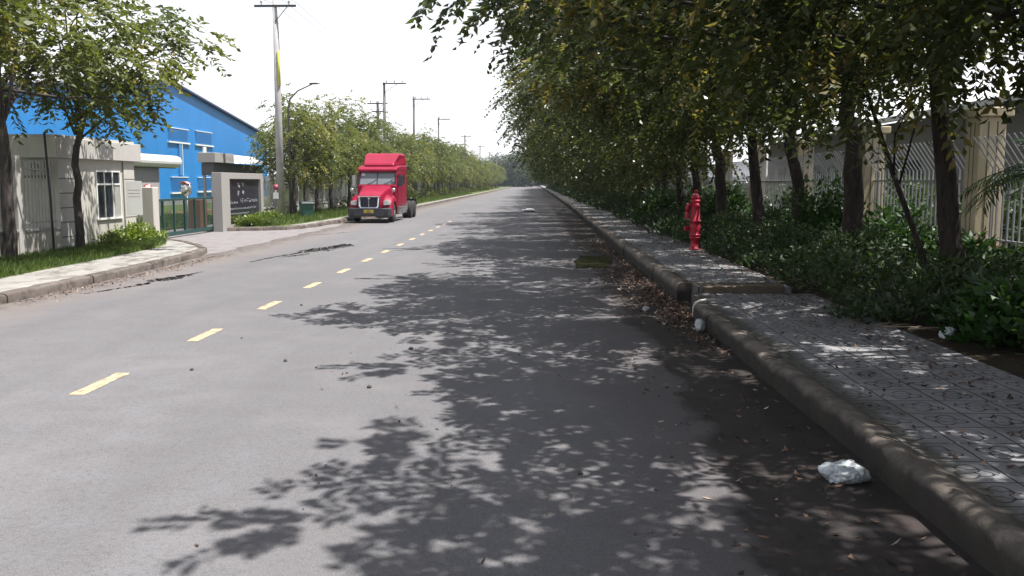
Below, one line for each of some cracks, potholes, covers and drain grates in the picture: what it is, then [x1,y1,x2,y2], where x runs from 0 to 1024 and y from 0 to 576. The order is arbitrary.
crack [85,271,204,294]
crack [250,253,310,262]
